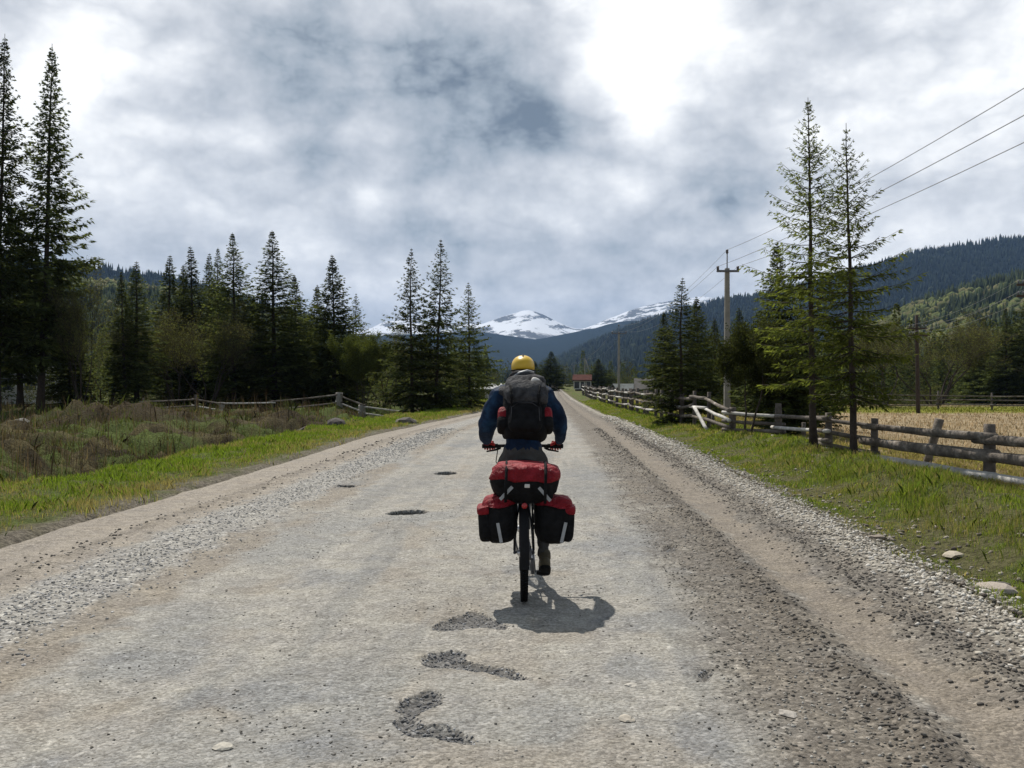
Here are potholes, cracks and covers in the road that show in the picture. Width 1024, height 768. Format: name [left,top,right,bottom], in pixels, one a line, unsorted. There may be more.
pothole [419,649,533,681]
pothole [431,610,511,631]
pothole [392,690,478,745]
pothole [698,669,714,682]
